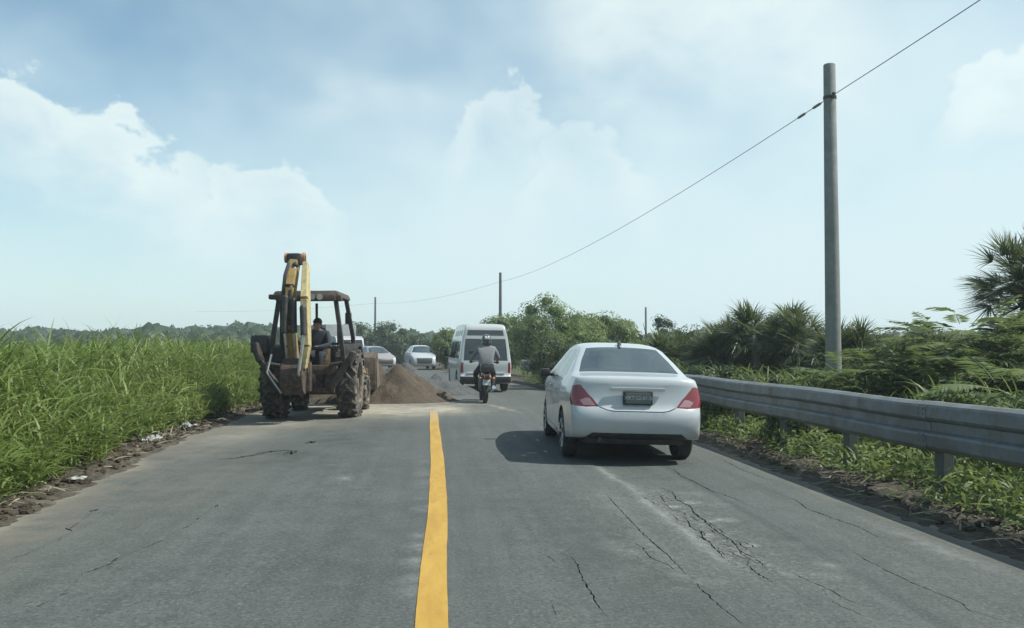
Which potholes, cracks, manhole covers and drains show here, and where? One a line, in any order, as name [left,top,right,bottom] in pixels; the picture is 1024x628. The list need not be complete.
crack [15,509,99,558]
crack [794,574,861,615]
crack [860,556,1023,625]
crack [644,469,772,582]
crack [217,450,293,460]
crack [725,461,879,537]
crack [610,499,741,623]
crack [36,505,218,607]
crack [571,557,607,616]
